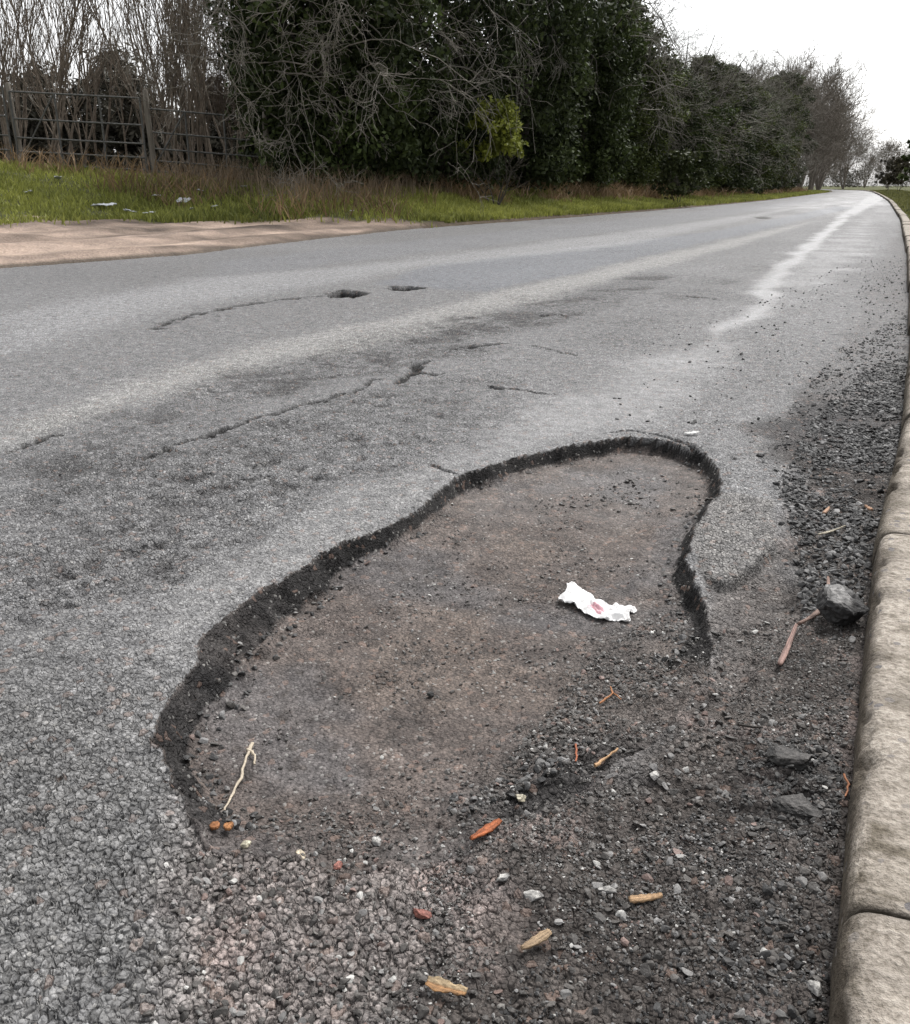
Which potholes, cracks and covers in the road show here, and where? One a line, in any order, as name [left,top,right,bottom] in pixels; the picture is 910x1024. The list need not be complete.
crack [6,433,62,454]
pothole [322,289,370,299]
crack [487,385,555,395]
pothole [148,436,725,880]
crack [142,343,507,461]
